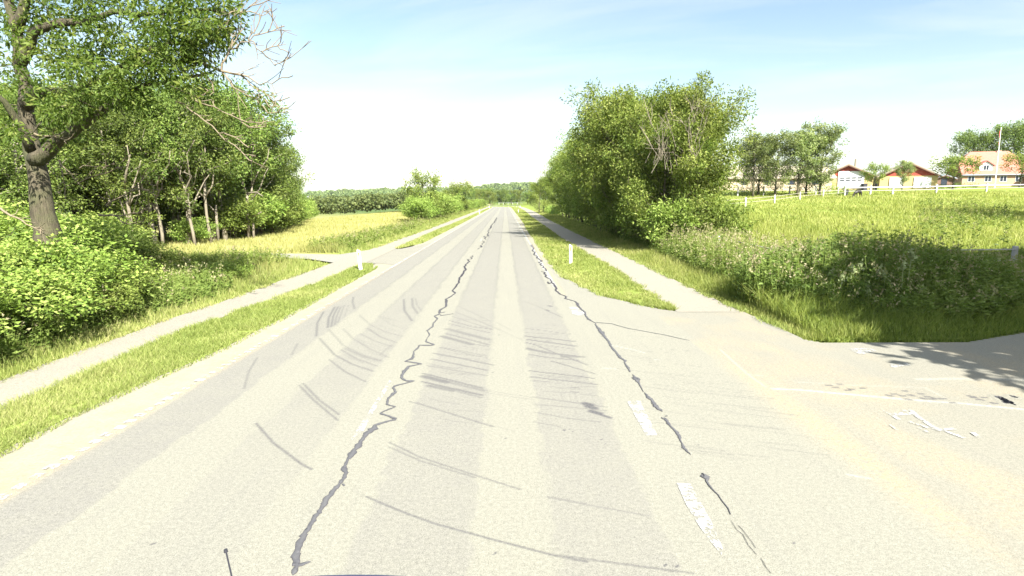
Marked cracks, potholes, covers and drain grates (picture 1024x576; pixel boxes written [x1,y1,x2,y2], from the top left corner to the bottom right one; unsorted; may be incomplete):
crack [531,245,691,455]
pothole [987,394,1024,408]
crack [290,218,497,575]
crack [700,473,771,573]
